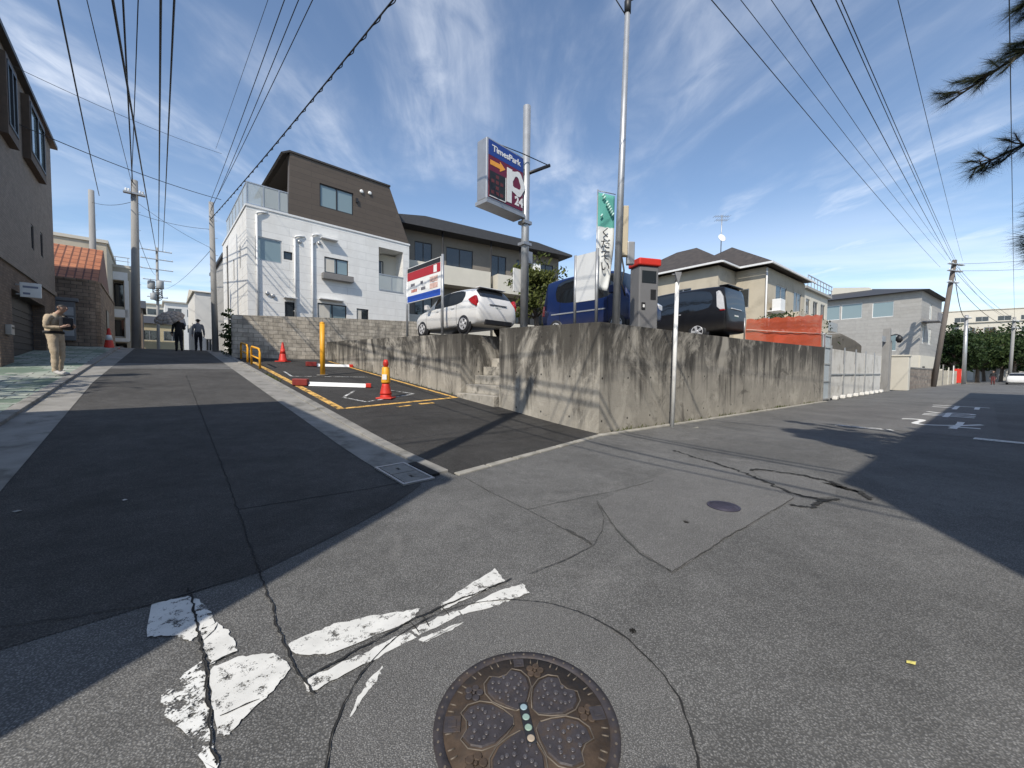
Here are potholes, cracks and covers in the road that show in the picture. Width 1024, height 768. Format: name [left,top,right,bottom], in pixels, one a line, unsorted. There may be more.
manhole cover [707,501,741,512]
crack [187,379,701,768]
crack [466,450,873,574]
manhole cover [433,652,621,768]
drain grate [374,462,440,486]
